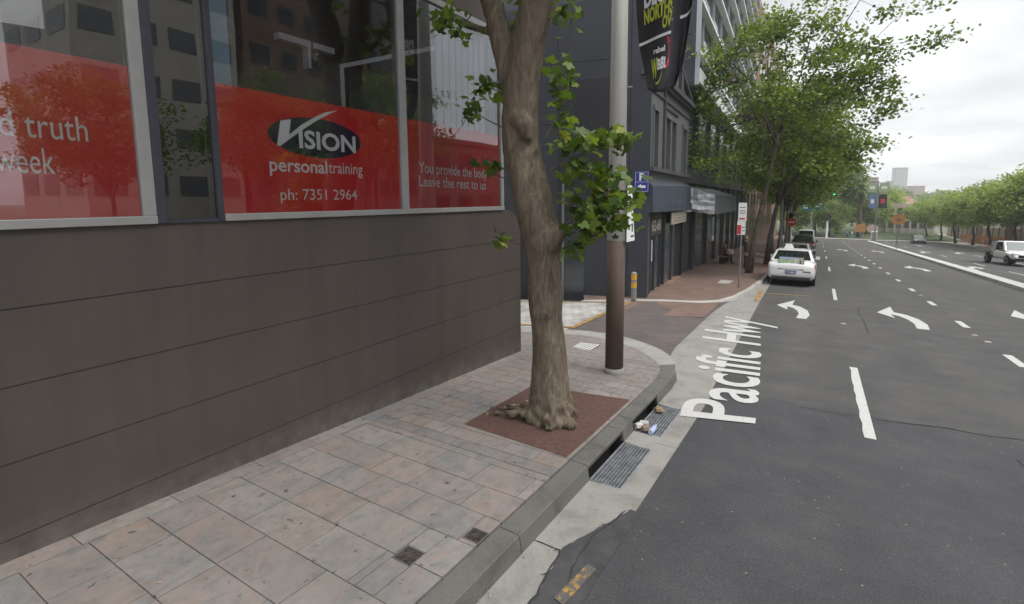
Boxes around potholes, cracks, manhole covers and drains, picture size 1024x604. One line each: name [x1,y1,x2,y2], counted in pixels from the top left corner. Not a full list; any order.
drain grate [632,398,681,447]
drain grate [588,435,652,490]
